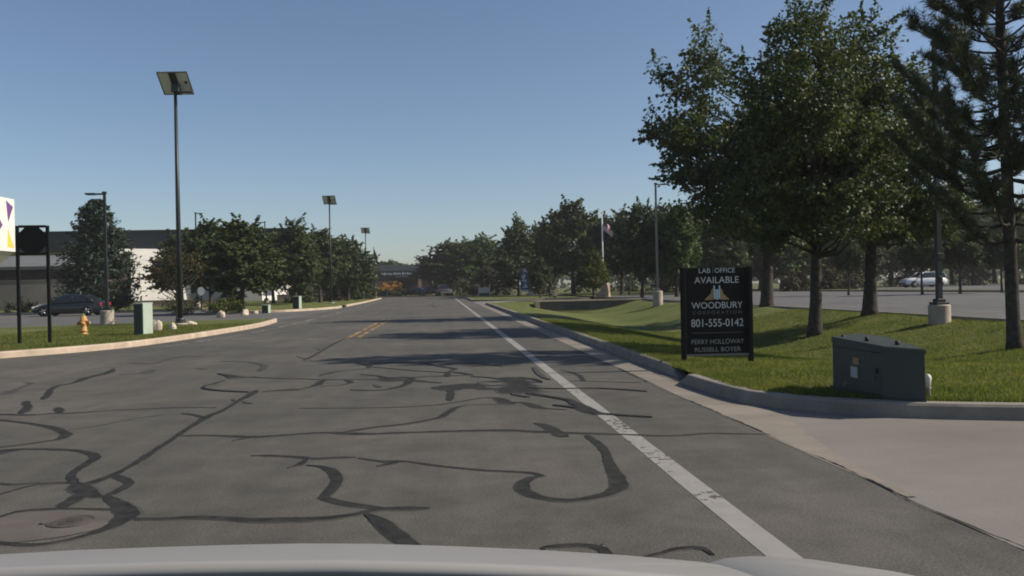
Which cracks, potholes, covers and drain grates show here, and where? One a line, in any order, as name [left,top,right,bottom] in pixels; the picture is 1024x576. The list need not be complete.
manhole cover [0,510,114,542]
